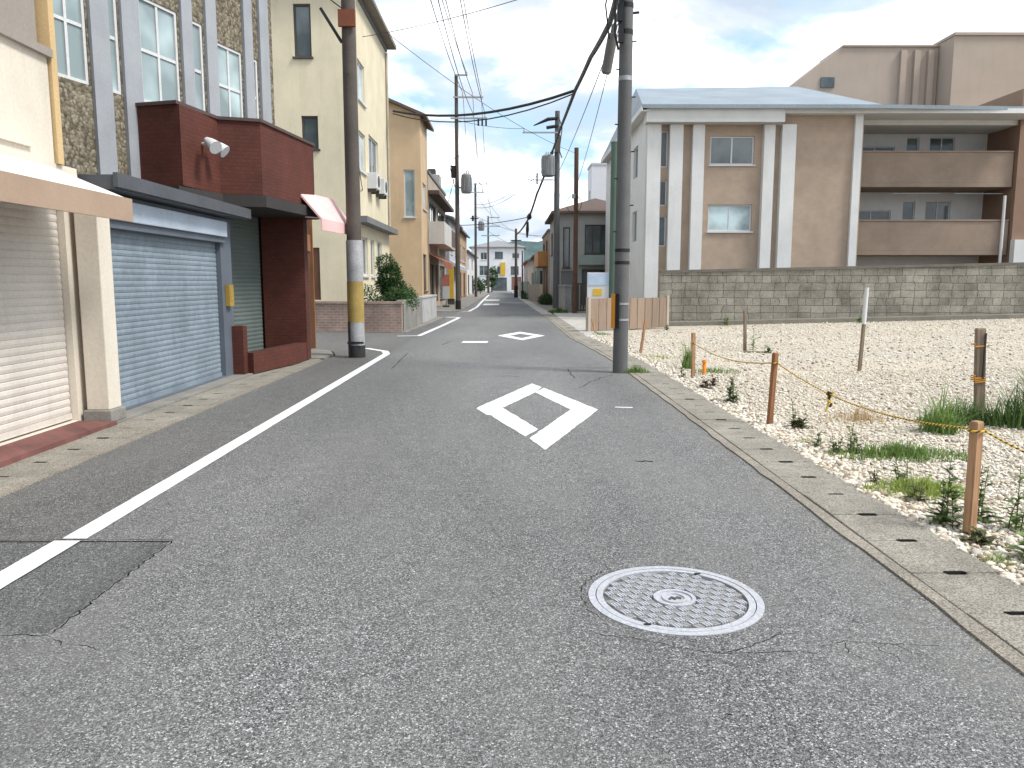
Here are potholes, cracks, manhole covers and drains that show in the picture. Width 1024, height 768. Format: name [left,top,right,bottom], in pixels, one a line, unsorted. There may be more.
crack [581,568,942,666]
manhole cover [588,566,765,636]
